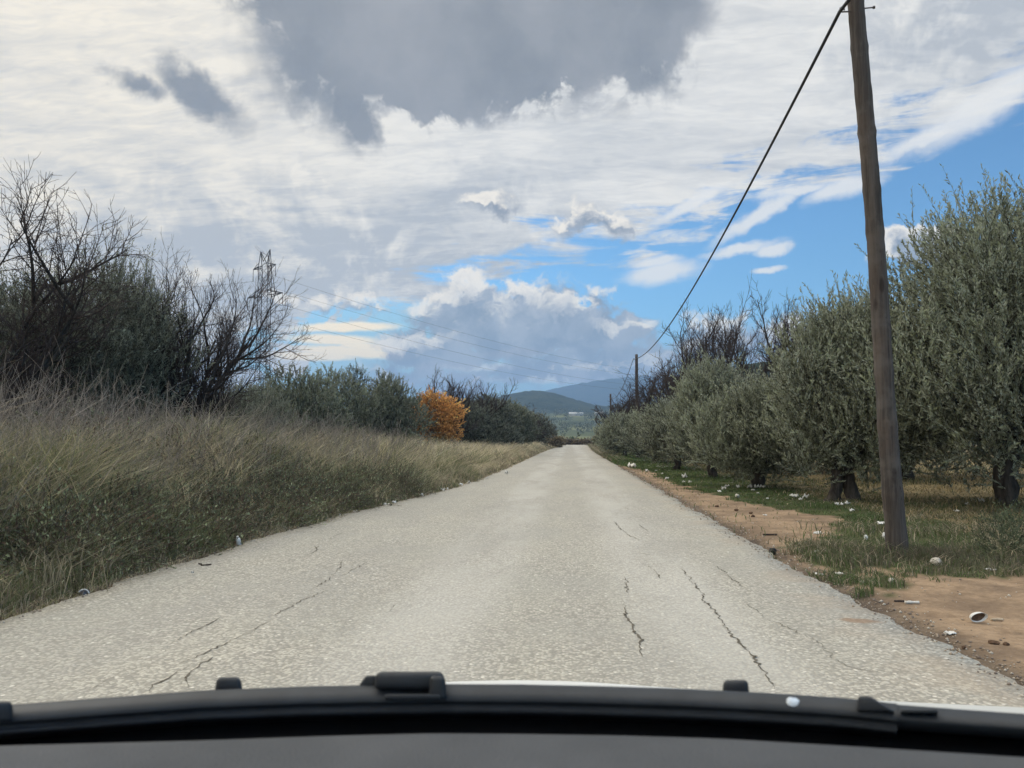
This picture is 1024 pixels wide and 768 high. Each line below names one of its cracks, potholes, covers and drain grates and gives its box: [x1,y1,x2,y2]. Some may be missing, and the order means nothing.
crack [684,571,775,688]
crack [717,567,892,672]
crack [623,576,644,656]
crack [149,554,365,691]
